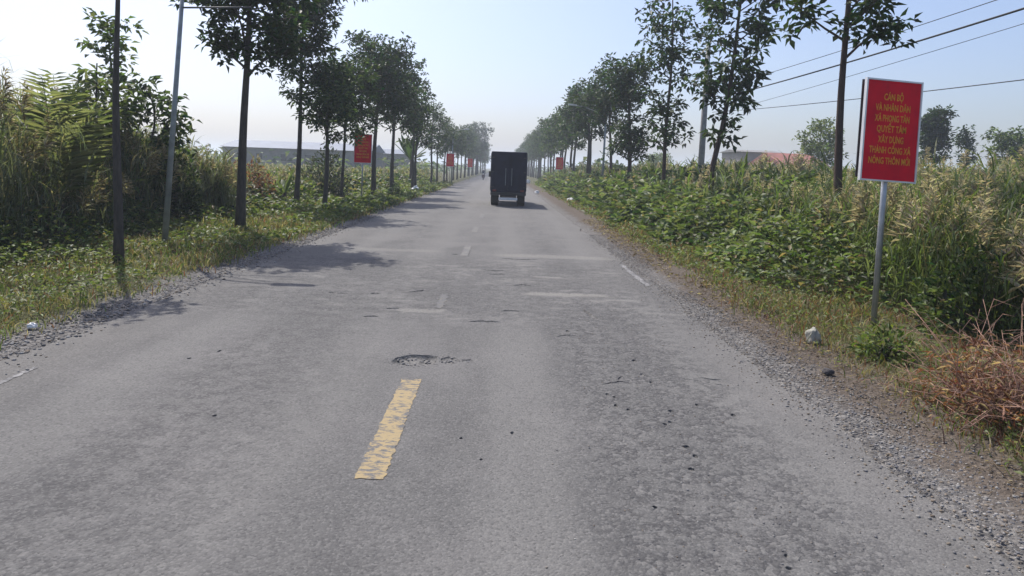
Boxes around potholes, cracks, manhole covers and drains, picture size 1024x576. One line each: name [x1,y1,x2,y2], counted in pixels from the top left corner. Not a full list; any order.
pothole [387,353,443,367]
pothole [438,355,460,364]
